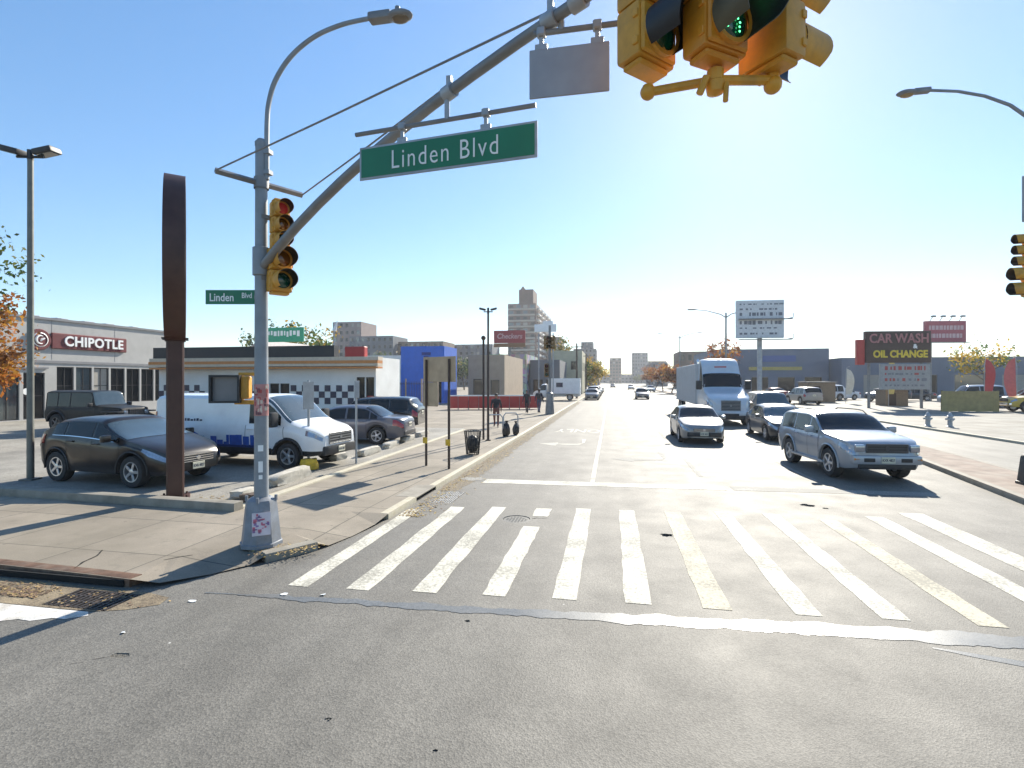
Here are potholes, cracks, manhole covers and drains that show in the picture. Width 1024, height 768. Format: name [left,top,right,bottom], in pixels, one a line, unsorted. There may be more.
manhole cover [502,515,531,523]
drain grate [0,569,139,611]
